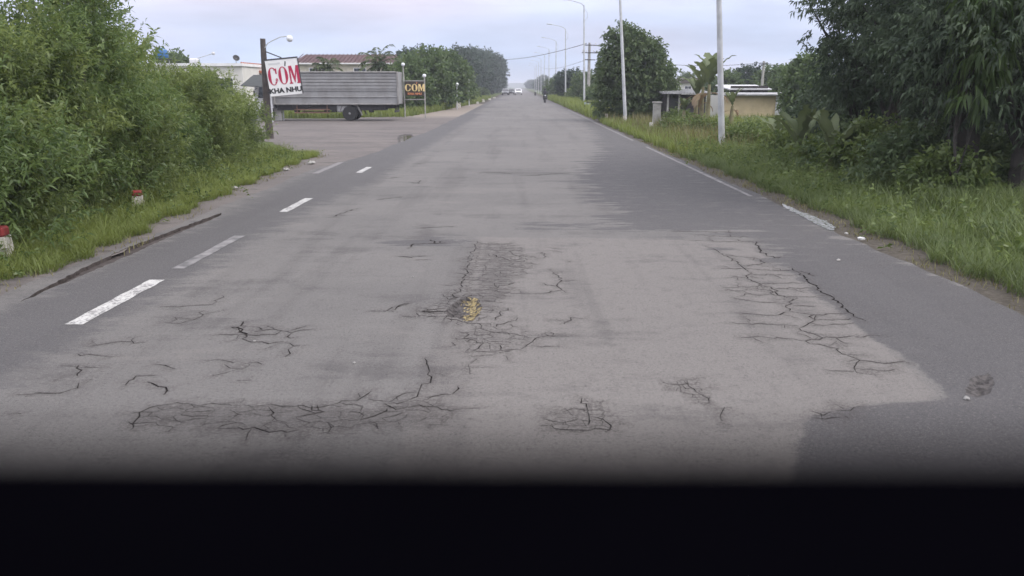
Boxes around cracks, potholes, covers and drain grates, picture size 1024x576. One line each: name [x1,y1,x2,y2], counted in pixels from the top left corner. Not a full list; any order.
crack [128,358,484,438]
crack [663,379,725,420]
crack [543,399,622,432]
crack [387,242,574,362]
pothole [445,297,482,322]
pothole [965,373,995,398]
crack [212,321,305,357]
crack [675,231,908,375]
